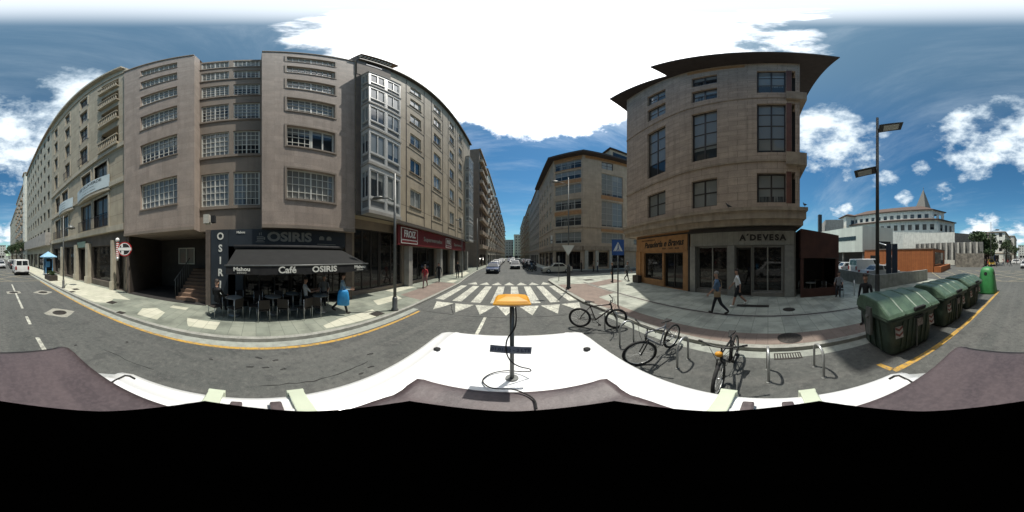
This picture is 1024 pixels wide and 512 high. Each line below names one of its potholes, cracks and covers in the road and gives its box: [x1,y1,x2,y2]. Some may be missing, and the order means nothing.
manhole cover [44,308,75,317]
manhole cover [777,333,802,343]
drain grate [774,352,803,360]
